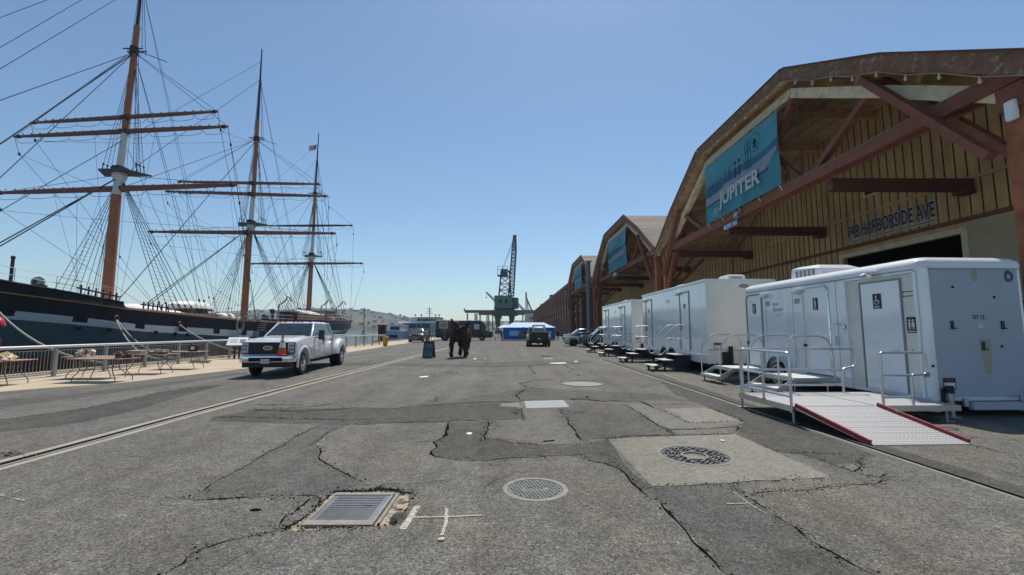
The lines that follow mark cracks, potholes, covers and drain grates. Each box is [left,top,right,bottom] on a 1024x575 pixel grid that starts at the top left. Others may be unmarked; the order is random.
manhole cover [657,445,735,466]
manhole cover [503,477,568,502]
crack [166,362,890,575]
